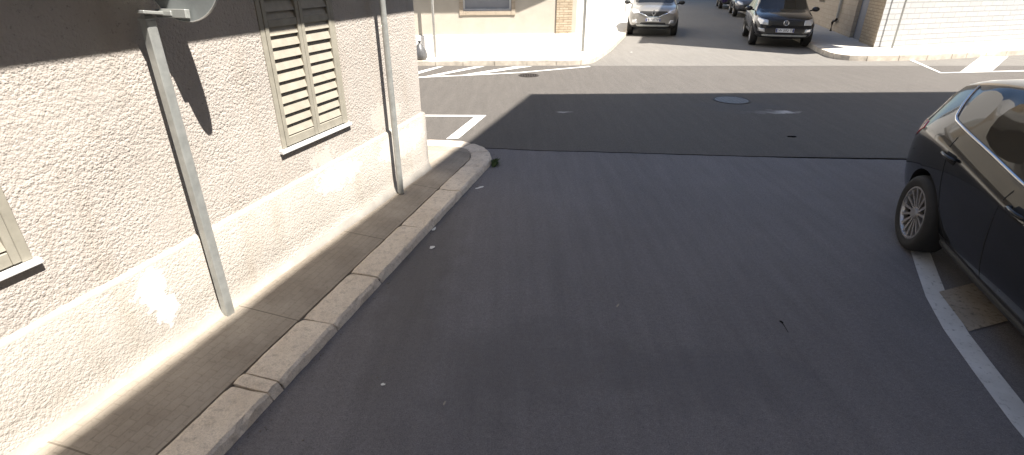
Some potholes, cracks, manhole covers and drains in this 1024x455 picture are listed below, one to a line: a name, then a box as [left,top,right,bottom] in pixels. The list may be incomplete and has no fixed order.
manhole cover [713,96,751,104]
